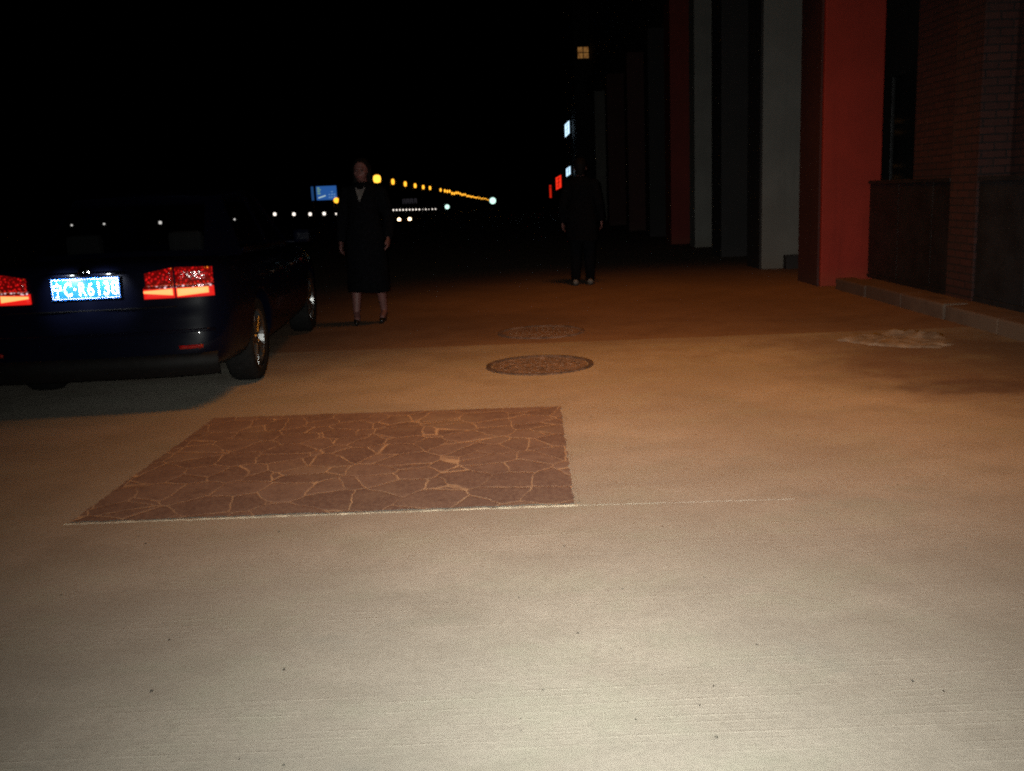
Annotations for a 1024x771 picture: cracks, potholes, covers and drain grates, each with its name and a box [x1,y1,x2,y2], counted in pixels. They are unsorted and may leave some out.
manhole cover [498,325,585,339]
manhole cover [486,355,594,376]
